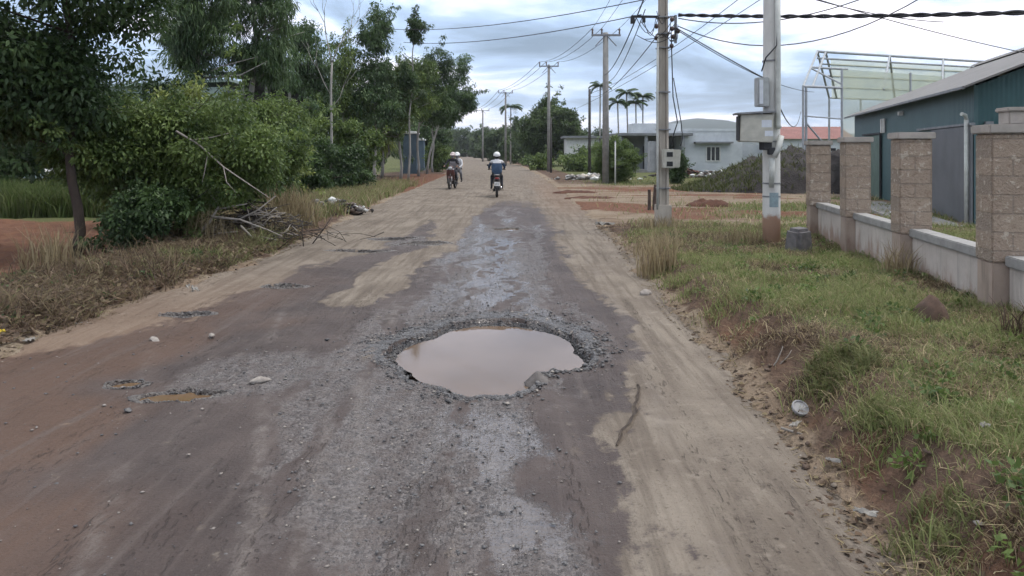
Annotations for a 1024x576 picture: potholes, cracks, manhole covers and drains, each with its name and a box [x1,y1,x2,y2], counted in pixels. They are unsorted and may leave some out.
pothole [102,379,154,390]
pothole [324,303,631,409]
pothole [127,386,236,404]
crack [616,384,641,446]
